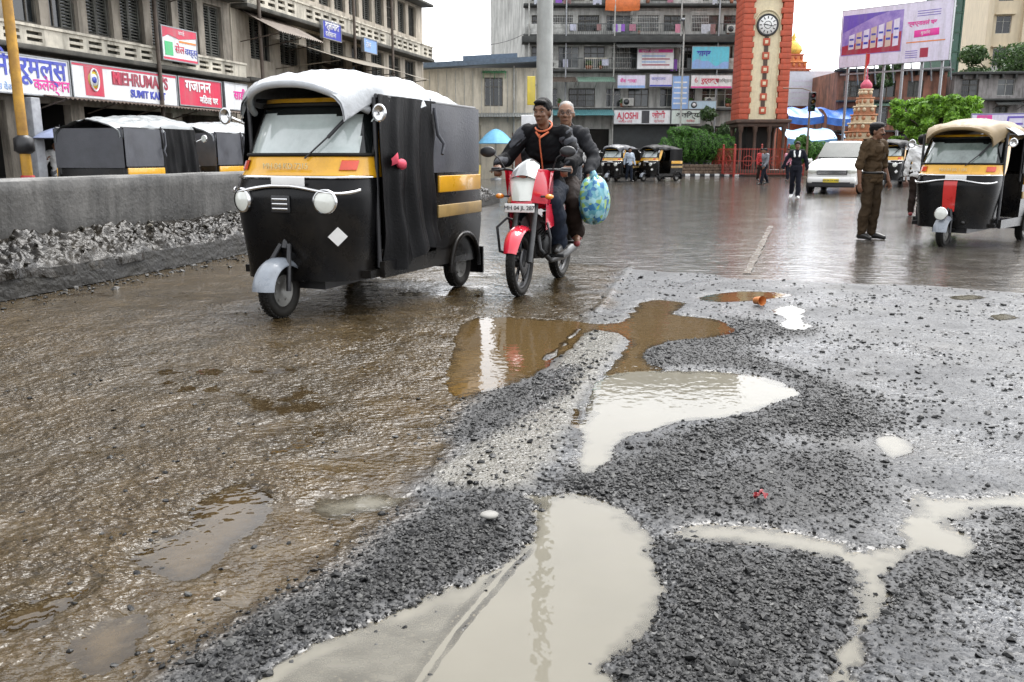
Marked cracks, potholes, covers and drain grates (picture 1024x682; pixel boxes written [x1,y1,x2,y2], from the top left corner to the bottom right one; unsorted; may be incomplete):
pothole [869,432,921,460]
pothole [987,312,1023,320]
pothole [439,298,740,429]
pothole [768,304,817,330]
pothole [572,366,804,474]
pothole [814,513,987,682]
pothole [695,289,794,302]
pothole [245,487,674,682]
